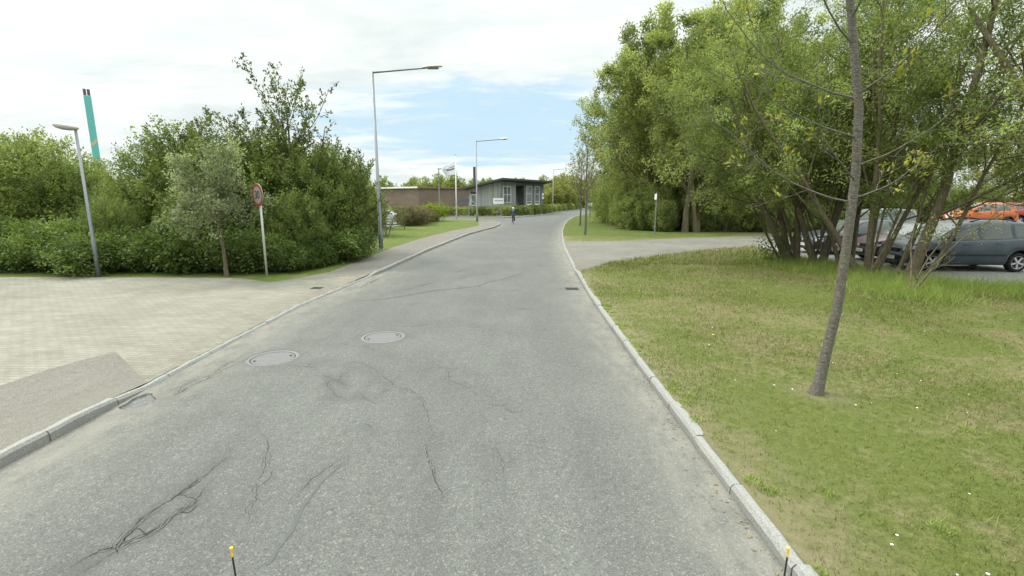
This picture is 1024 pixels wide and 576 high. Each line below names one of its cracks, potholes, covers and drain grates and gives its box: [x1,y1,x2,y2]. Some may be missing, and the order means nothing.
crack [165,357,241,395]
crack [245,435,272,517]
pothole [118,393,156,410]
crack [425,445,445,502]
manhole cover [361,331,405,343]
crack [366,269,527,301]
manhole cover [245,350,299,366]
